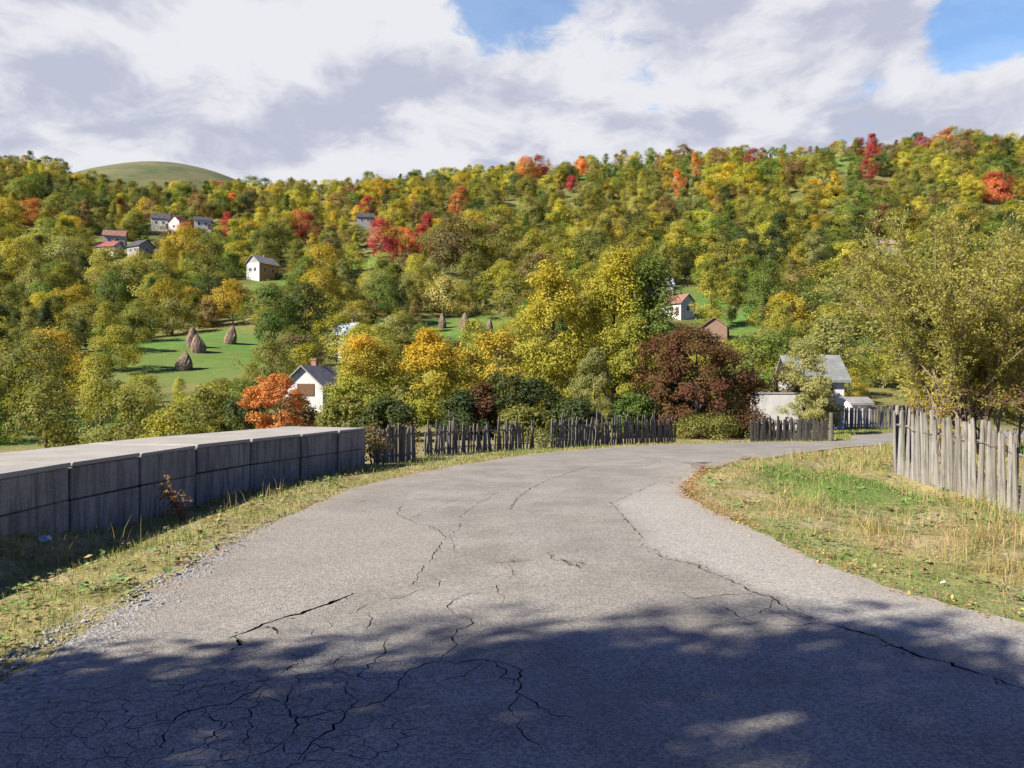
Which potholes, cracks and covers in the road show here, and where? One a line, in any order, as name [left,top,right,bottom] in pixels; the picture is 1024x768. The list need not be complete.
crack [7,614,585,768]
crack [391,492,818,626]
crack [138,593,373,655]
